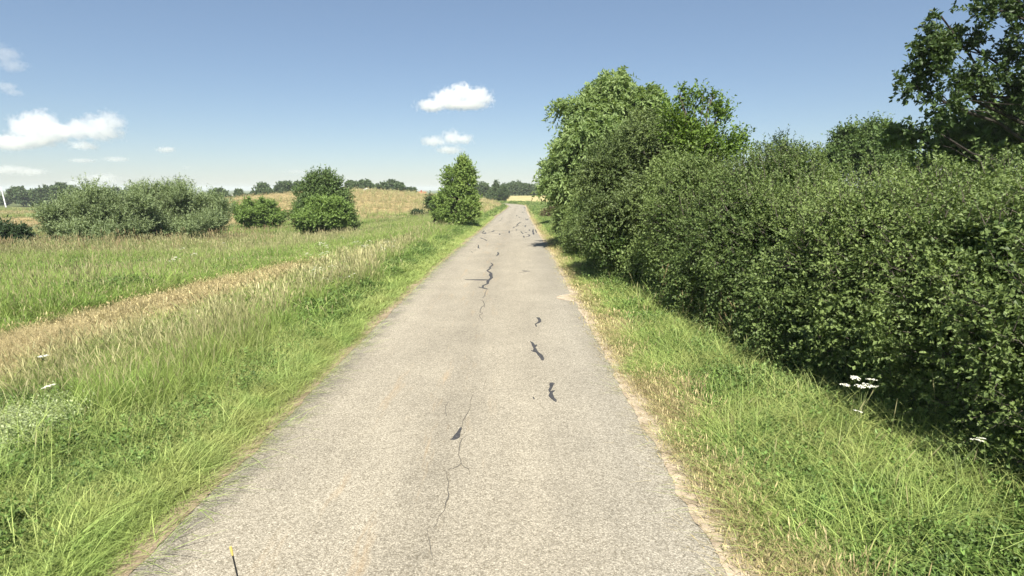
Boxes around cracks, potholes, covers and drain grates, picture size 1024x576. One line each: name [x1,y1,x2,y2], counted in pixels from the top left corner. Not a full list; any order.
crack [471,207,537,253]
crack [427,381,486,557]
